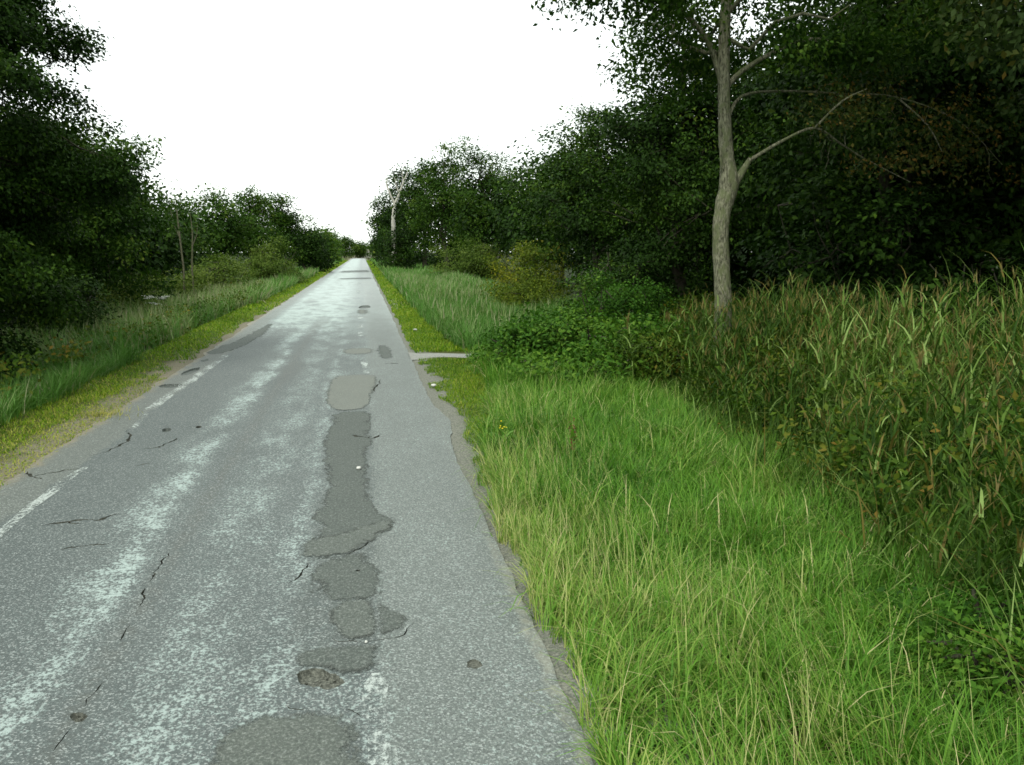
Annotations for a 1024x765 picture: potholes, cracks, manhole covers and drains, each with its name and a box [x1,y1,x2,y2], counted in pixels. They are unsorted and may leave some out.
pothole [466,659,483,669]
pothole [297,668,345,690]
crack [46,514,116,525]
pothole [70,712,87,722]
crack [140,552,170,606]
